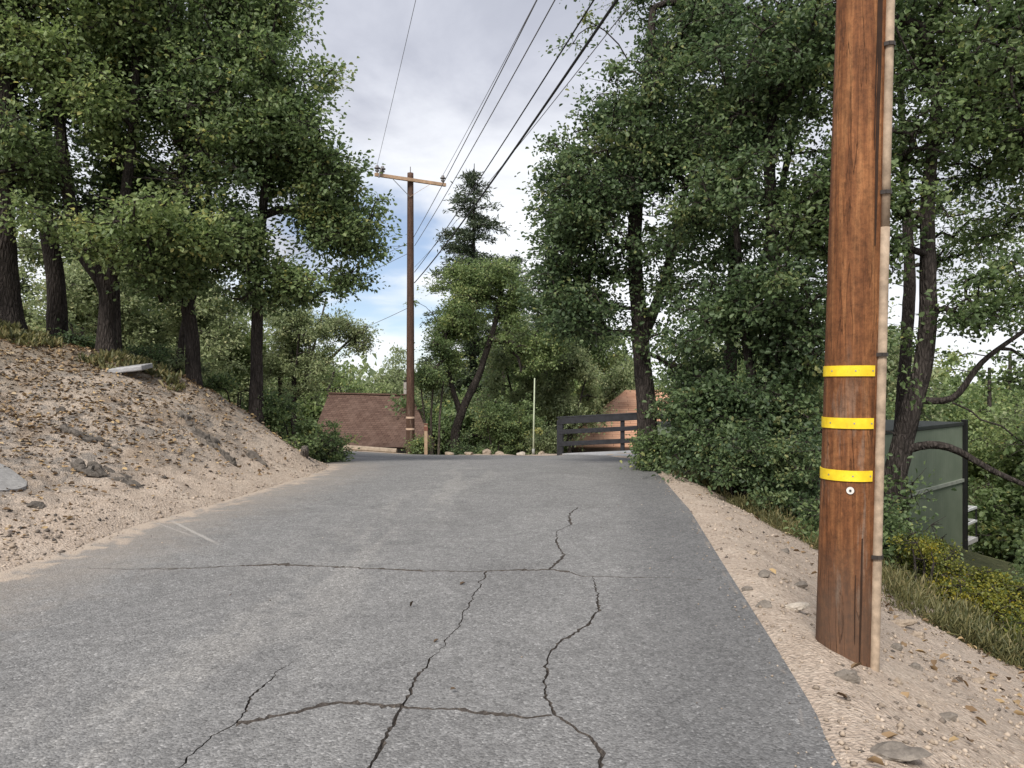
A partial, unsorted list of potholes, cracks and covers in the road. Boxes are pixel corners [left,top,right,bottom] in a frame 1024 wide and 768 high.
crack [90,507,701,768]
